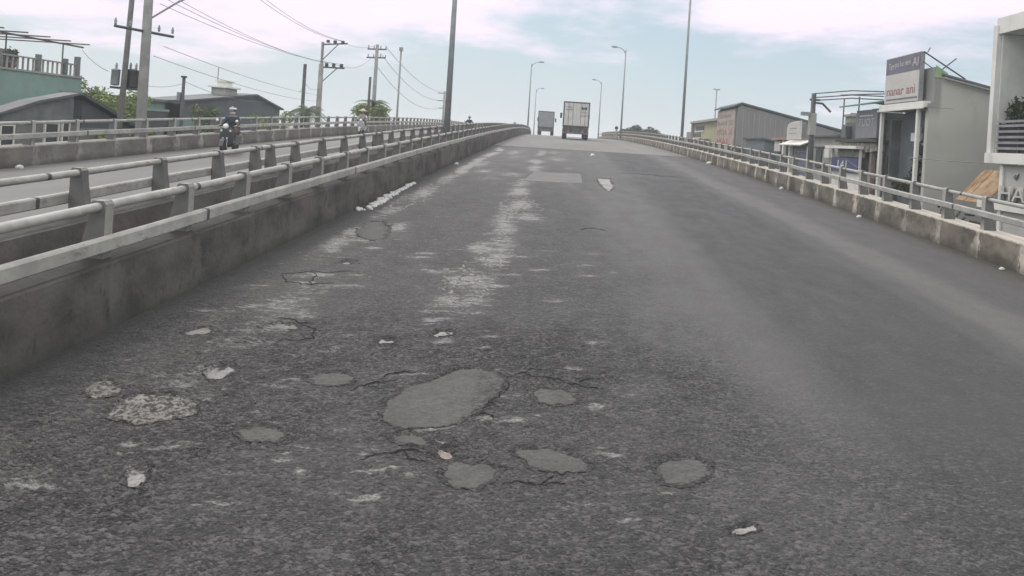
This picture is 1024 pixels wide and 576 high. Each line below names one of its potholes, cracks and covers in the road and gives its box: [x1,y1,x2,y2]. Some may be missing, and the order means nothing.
crack [281,271,340,285]
pothole [99,391,202,426]
crack [360,448,425,462]
crack [353,370,416,390]
crack [479,367,597,417]
crack [272,317,316,341]
pothole [81,378,132,399]
crack [502,475,566,485]
